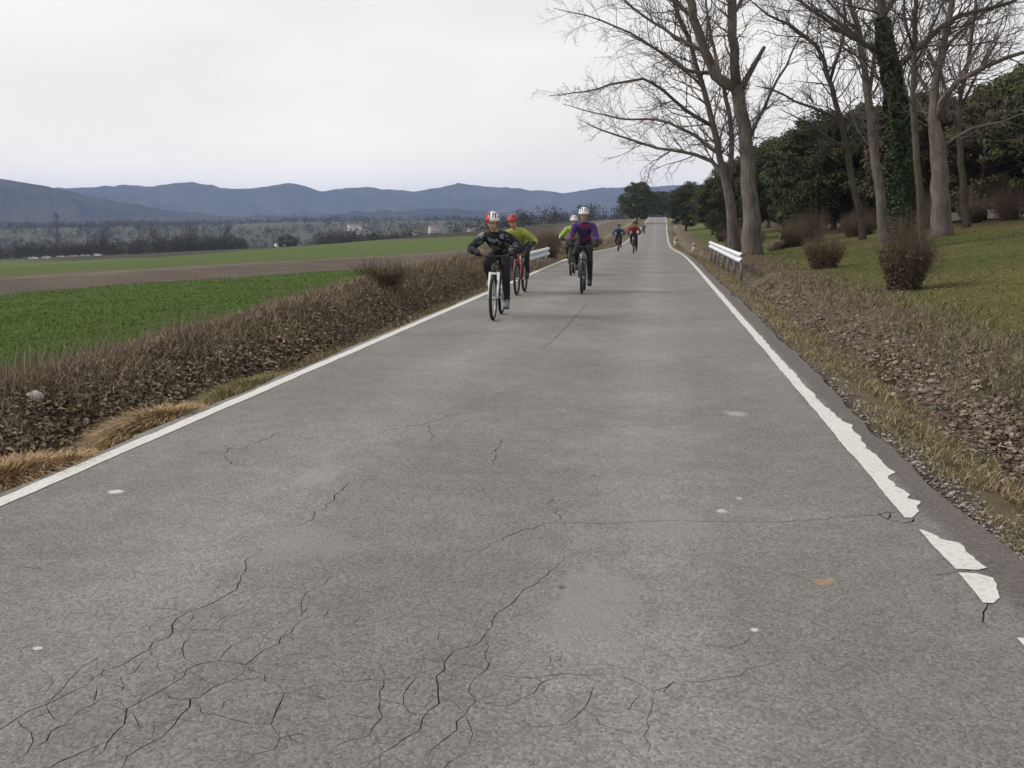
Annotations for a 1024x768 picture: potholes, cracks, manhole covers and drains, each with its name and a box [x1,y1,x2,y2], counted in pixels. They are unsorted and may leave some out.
crack [286,557,602,768]
crack [0,553,369,768]
crack [465,497,915,559]
crack [518,660,776,764]
crack [492,424,696,465]
crack [982,603,1001,634]
crack [197,432,280,465]
